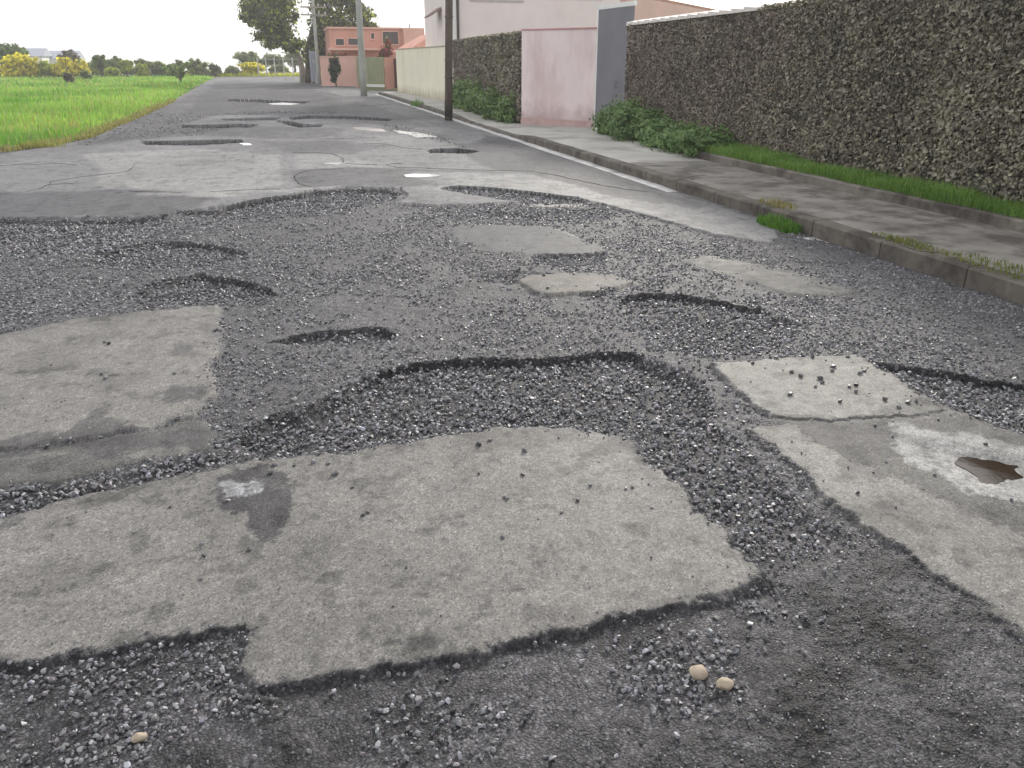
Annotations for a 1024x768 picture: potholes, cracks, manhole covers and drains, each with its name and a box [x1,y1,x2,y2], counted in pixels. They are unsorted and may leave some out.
pothole [124,272,280,306]
pothole [81,239,253,272]
crack [294,138,512,187]
pothole [617,292,805,358]
pothole [225,350,722,461]
crack [4,163,134,189]
pothole [267,326,404,348]
